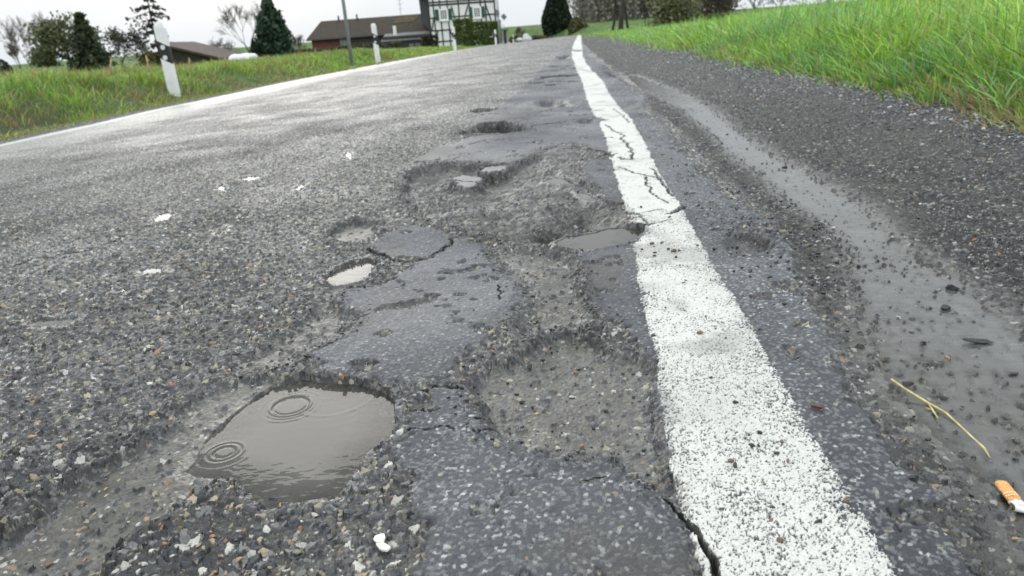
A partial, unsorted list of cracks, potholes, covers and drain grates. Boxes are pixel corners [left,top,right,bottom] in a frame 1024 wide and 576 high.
pothole [326,216,382,243]
crack [586,108,688,234]
crack [662,498,723,576]
pothole [462,329,676,503]
pothole [522,99,579,107]
crack [366,238,454,263]
pothole [393,142,648,251]
pothole [461,120,530,134]
pothole [0,368,401,576]
crack [396,384,493,433]
